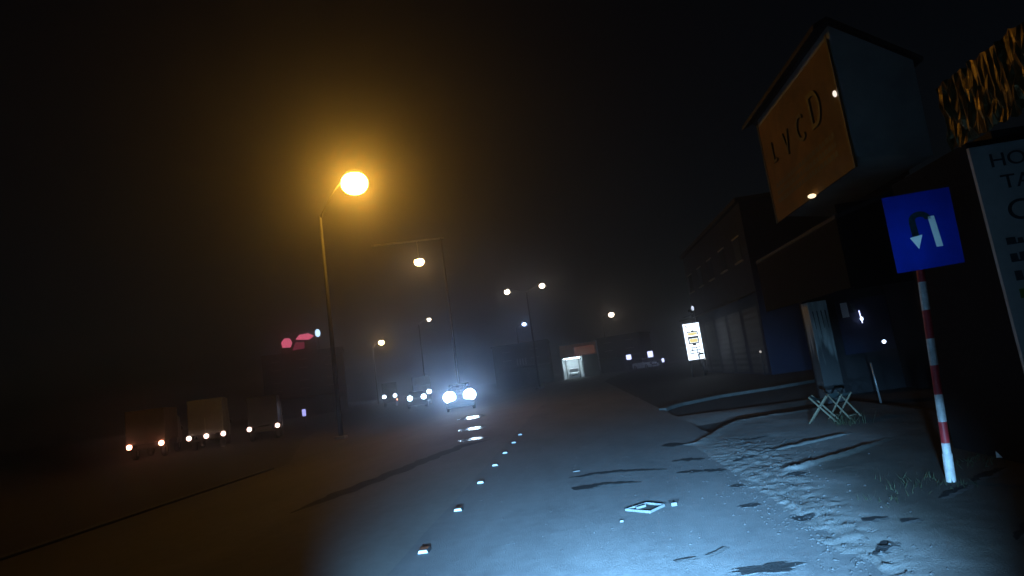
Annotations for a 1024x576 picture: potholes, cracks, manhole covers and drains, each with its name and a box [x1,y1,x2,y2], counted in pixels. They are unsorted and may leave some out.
crack [673,546,730,563]
pothole [728,561,809,576]
pothole [789,513,817,522]
manhole cover [625,502,665,513]
crack [569,436,768,491]
